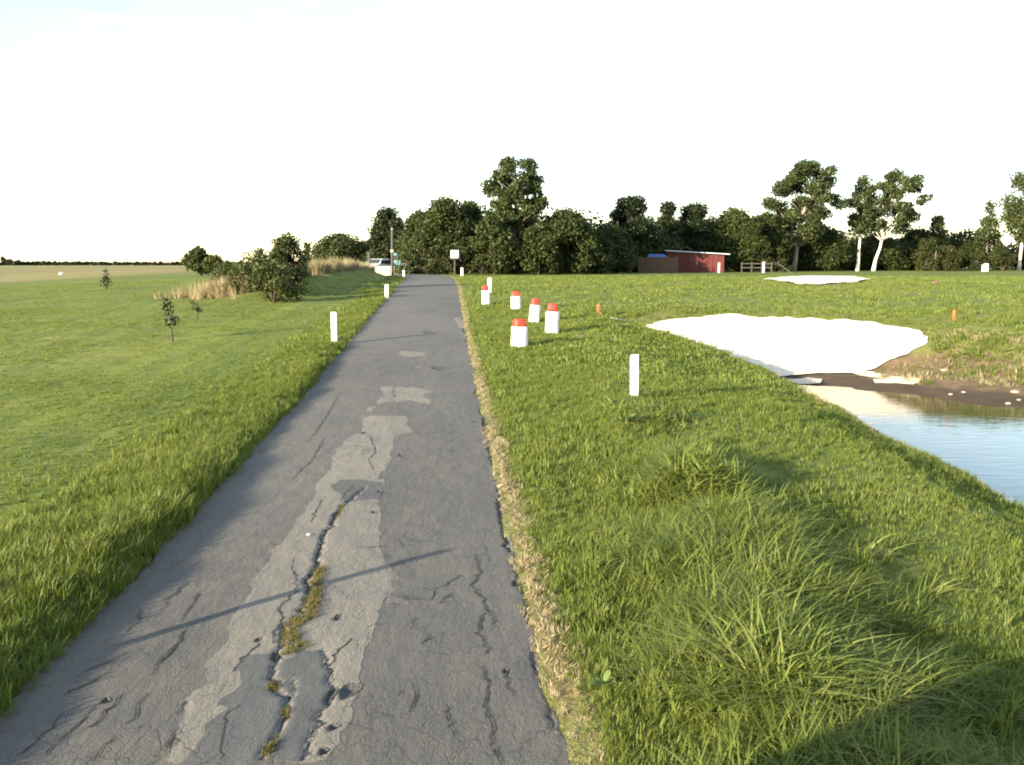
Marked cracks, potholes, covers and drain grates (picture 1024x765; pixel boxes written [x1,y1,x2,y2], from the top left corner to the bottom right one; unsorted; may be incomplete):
crack [291,393,340,481]
crack [436,553,514,763]
crack [166,701,186,755]
crack [398,684,417,712]
crack [497,502,527,614]
crack [149,581,199,676]
crack [233,484,363,760]
crack [16,652,148,758]
pothole [339,683,362,699]
